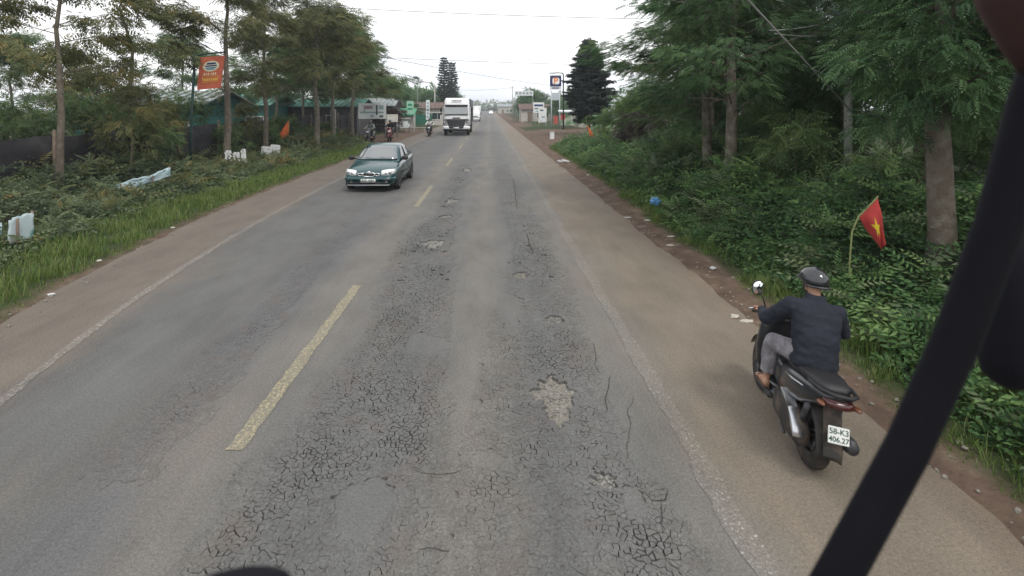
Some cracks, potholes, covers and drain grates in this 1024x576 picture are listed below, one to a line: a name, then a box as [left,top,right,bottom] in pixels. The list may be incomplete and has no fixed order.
pothole [524,367,582,437]
pothole [510,270,533,281]
pothole [416,239,450,250]
pothole [586,468,623,491]
pothole [540,313,569,326]
crack [76,163,712,576]
